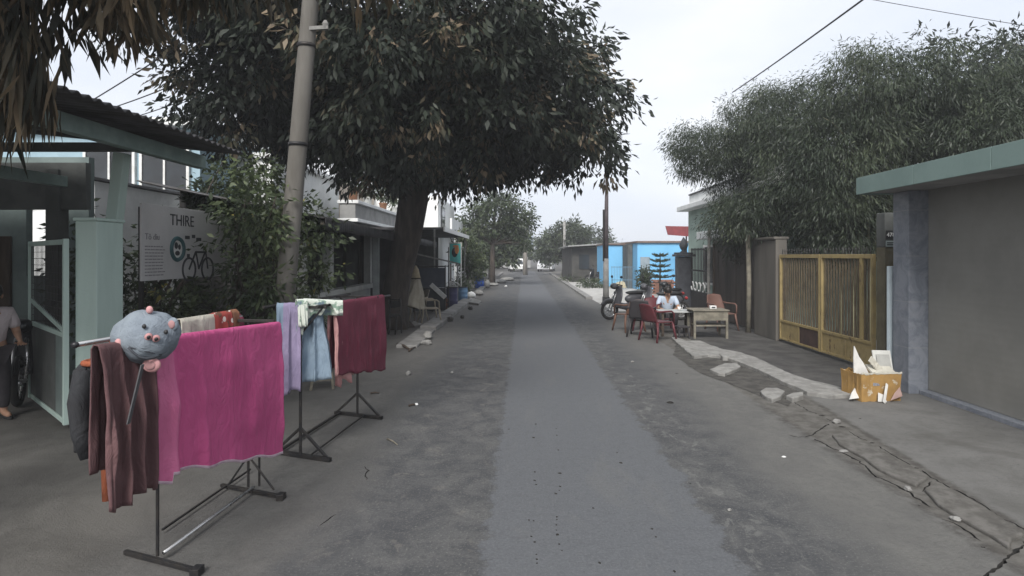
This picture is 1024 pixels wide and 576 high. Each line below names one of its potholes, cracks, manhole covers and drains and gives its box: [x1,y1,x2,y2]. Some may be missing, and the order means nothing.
crack [790,402,1024,529]
